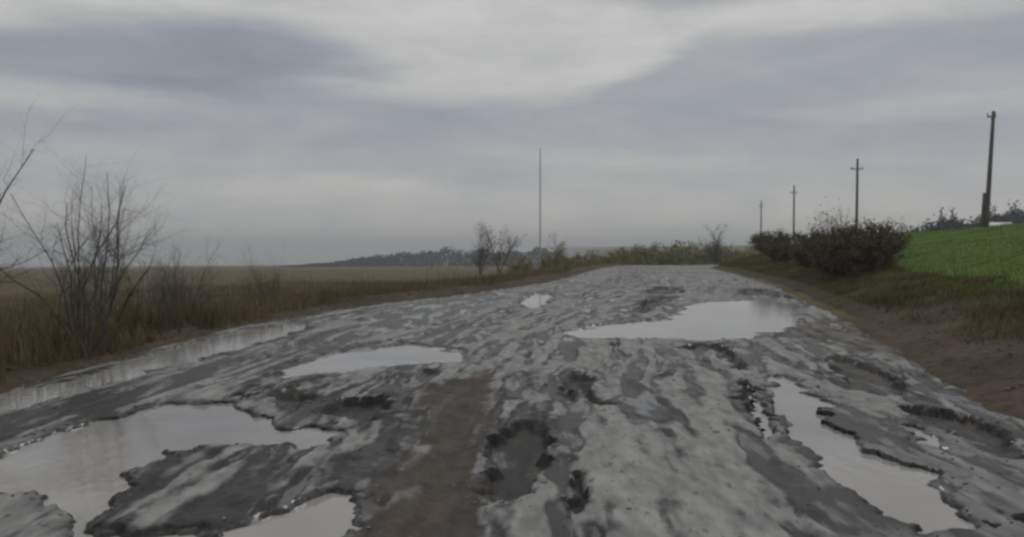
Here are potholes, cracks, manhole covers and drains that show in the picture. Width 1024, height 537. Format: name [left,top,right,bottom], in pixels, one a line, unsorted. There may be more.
pothole [901,405,1022,459]
pothole [269,386,316,410]
pothole [470,412,556,503]
pothole [513,291,553,308]
pothole [547,299,809,341]
pothole [273,344,468,380]
pothole [733,380,775,435]
pothole [0,398,365,537]
pothole [747,375,980,536]
pothole [634,295,677,314]
pothole [0,320,307,412]
pothole [571,470,589,514]
